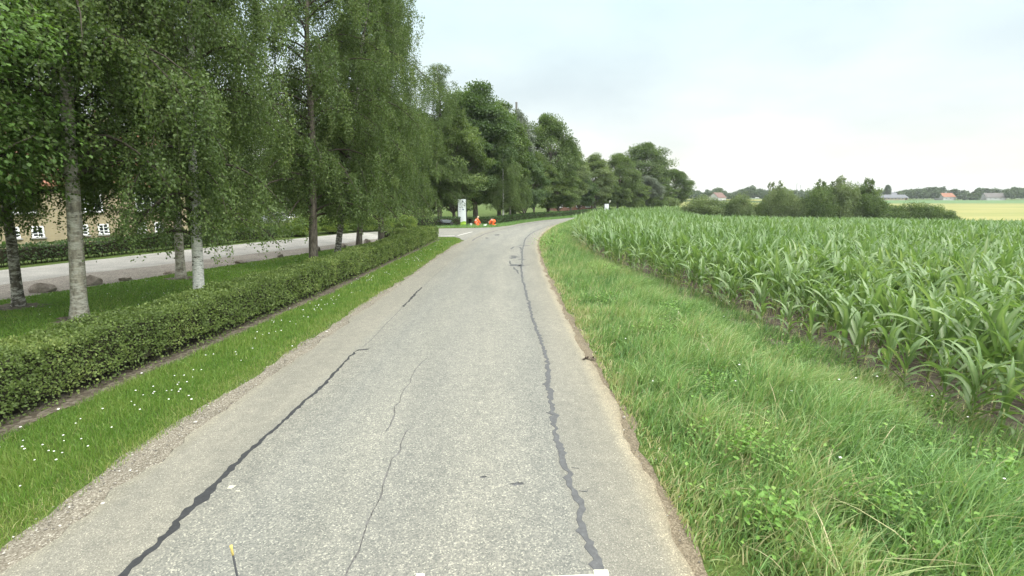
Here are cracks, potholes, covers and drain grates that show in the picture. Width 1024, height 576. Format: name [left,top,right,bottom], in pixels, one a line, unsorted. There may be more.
crack [345,358,427,576]
